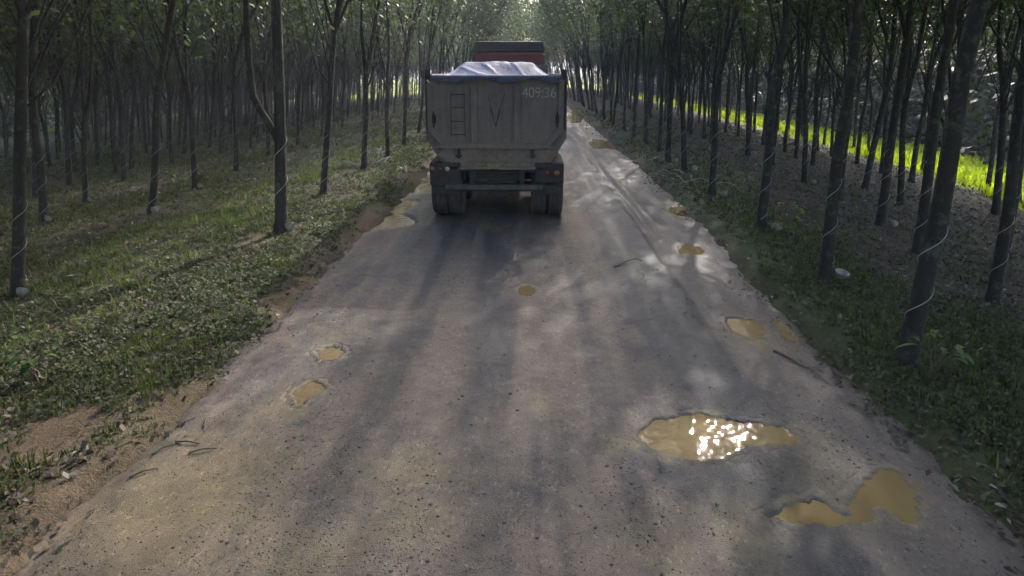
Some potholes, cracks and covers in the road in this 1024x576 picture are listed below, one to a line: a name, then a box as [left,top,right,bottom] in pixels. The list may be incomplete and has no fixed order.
pothole [510,283,544,298]
pothole [716,315,784,343]
pothole [284,377,335,410]
pothole [672,242,711,257]
pothole [308,343,351,365]
pothole [756,459,936,539]
pothole [629,408,810,468]
pothole [586,138,616,150]
pothole [662,203,688,218]
pothole [758,316,805,348]
pothole [371,198,424,230]
